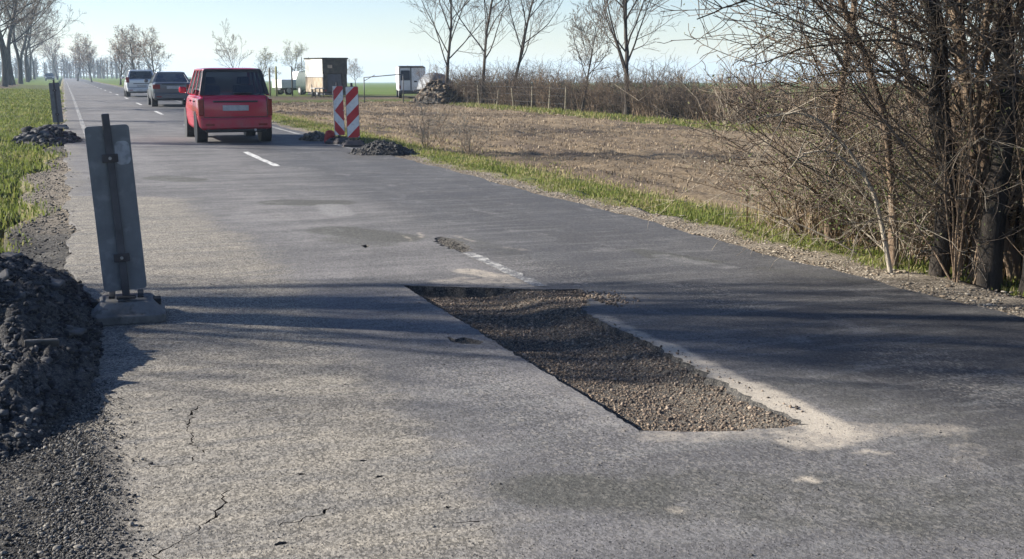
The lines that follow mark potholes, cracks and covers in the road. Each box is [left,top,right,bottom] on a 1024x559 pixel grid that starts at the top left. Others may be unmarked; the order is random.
pothole [404,285,808,432]
crack [280,508,329,525]
crack [152,485,233,559]
pothole [433,237,474,252]
crack [135,405,205,467]
